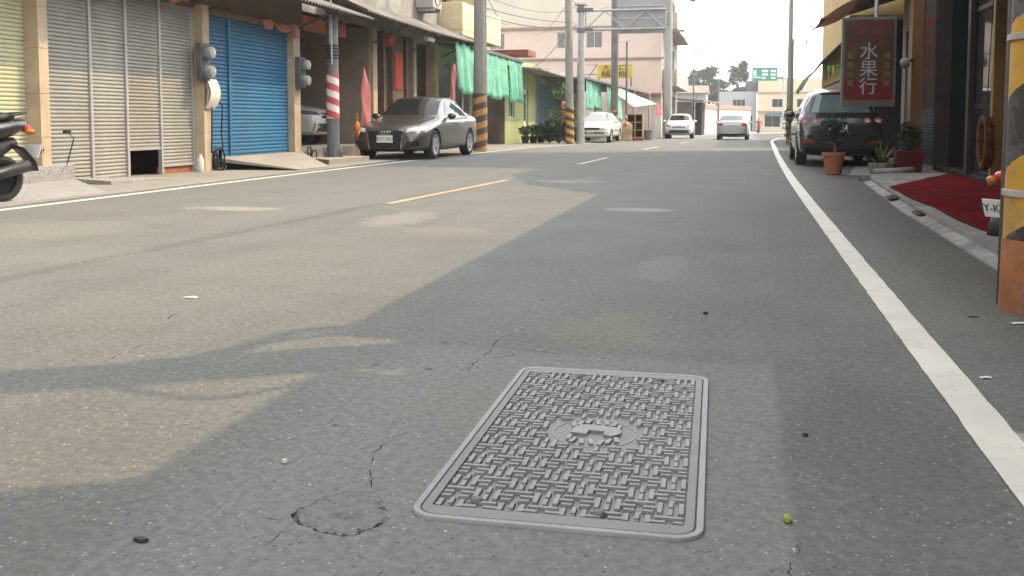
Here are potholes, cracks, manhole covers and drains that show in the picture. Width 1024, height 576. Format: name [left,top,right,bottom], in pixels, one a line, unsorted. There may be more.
manhole cover [412,367,709,542]
